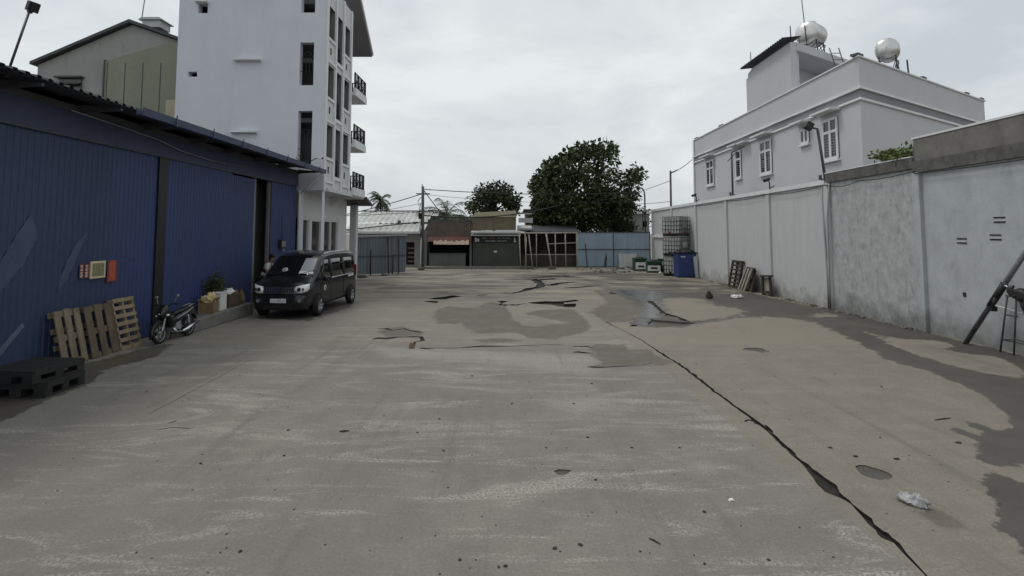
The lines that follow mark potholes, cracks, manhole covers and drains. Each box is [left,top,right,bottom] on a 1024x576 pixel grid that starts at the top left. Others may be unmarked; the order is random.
pothole [855,465,892,480]
crack [477,275,593,306]
crack [374,328,425,344]
